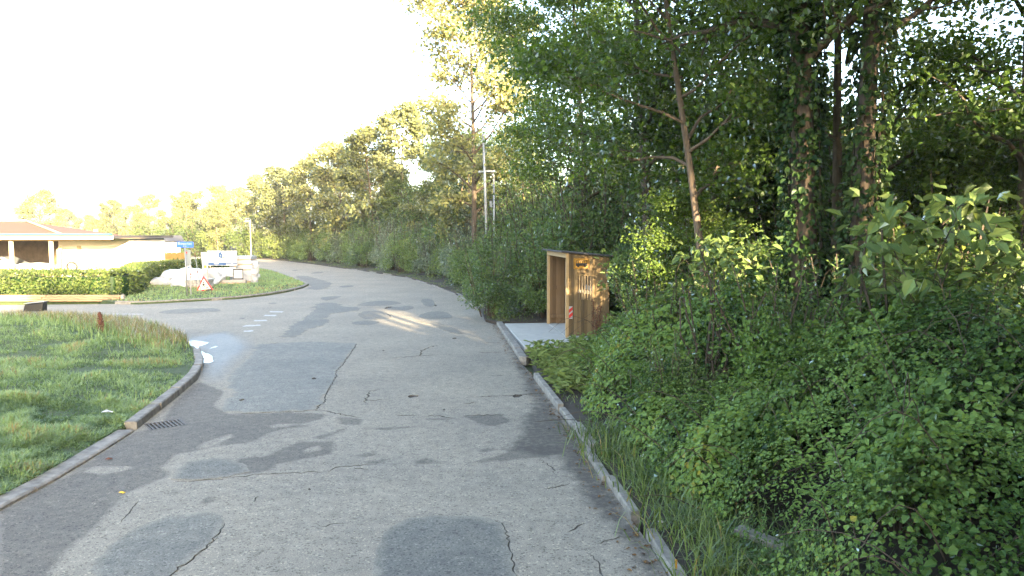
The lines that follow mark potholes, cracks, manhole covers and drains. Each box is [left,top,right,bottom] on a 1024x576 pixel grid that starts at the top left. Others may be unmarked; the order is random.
crack [496,521,517,576]
drain grate [144,419,187,430]
crack [569,523,628,576]
crack [170,523,225,576]
crack [238,344,376,417]
